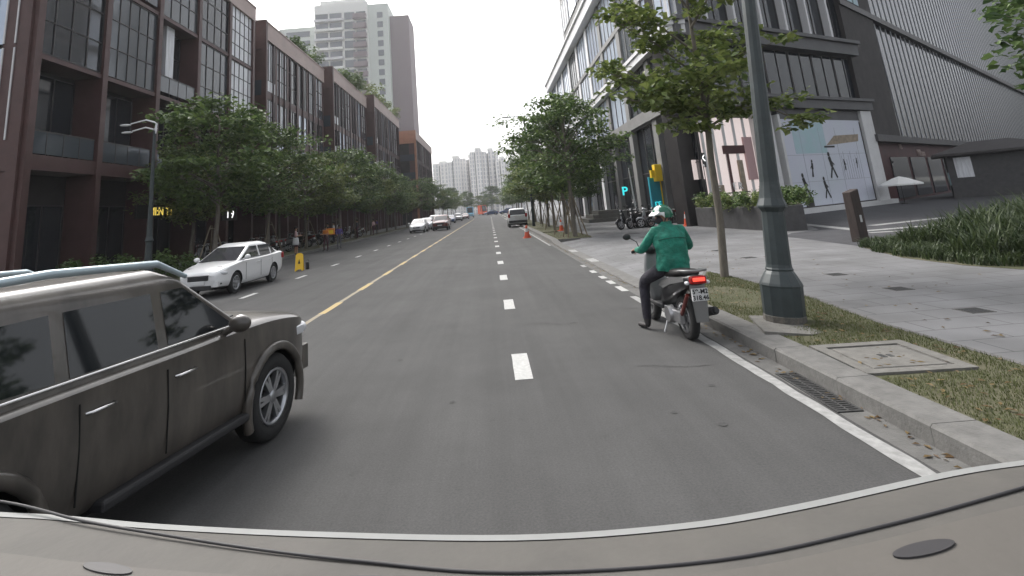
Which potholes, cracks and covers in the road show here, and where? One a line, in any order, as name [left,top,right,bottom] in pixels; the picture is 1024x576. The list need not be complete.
drain grate [775,372,864,413]
manhole cover [809,340,979,376]
